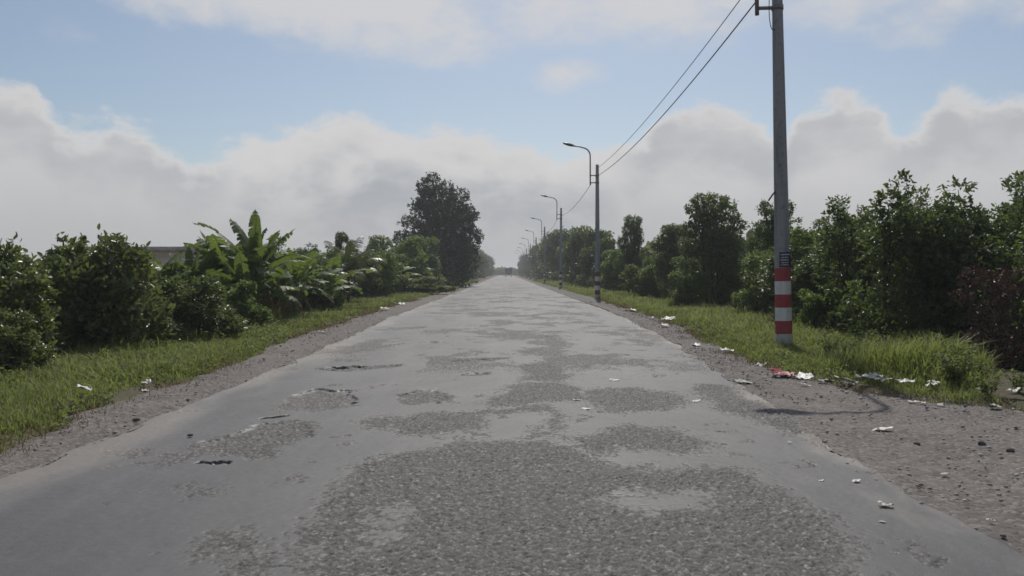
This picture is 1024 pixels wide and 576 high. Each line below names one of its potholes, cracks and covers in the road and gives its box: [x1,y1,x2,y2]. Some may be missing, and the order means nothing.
pothole [395,389,457,405]
pothole [273,388,358,413]
pothole [310,364,402,372]
